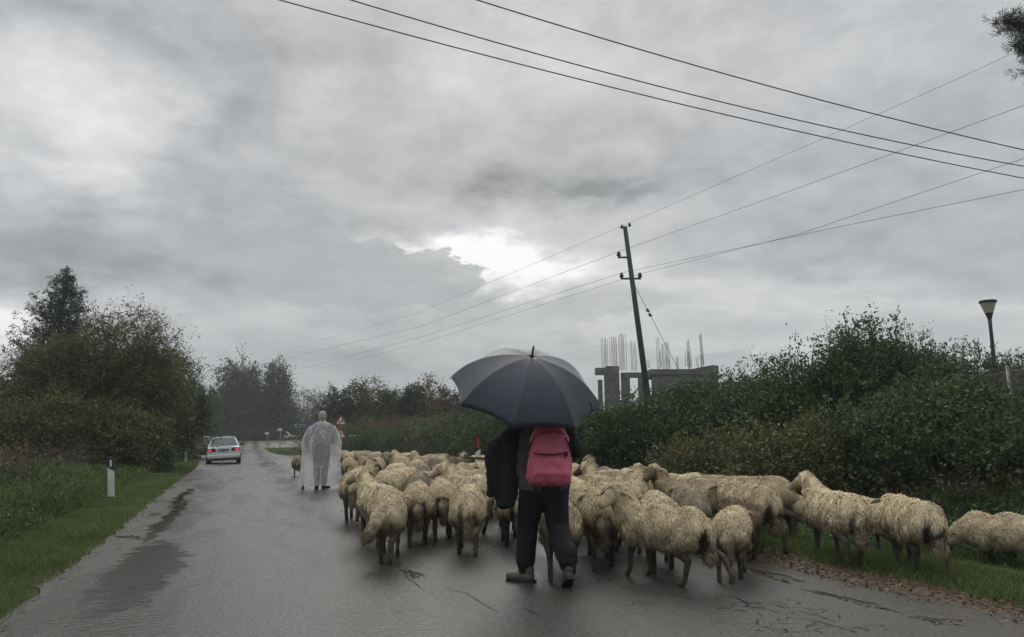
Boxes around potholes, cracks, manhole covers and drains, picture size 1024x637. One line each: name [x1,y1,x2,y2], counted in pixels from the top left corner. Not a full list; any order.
crack [631,572,871,633]
